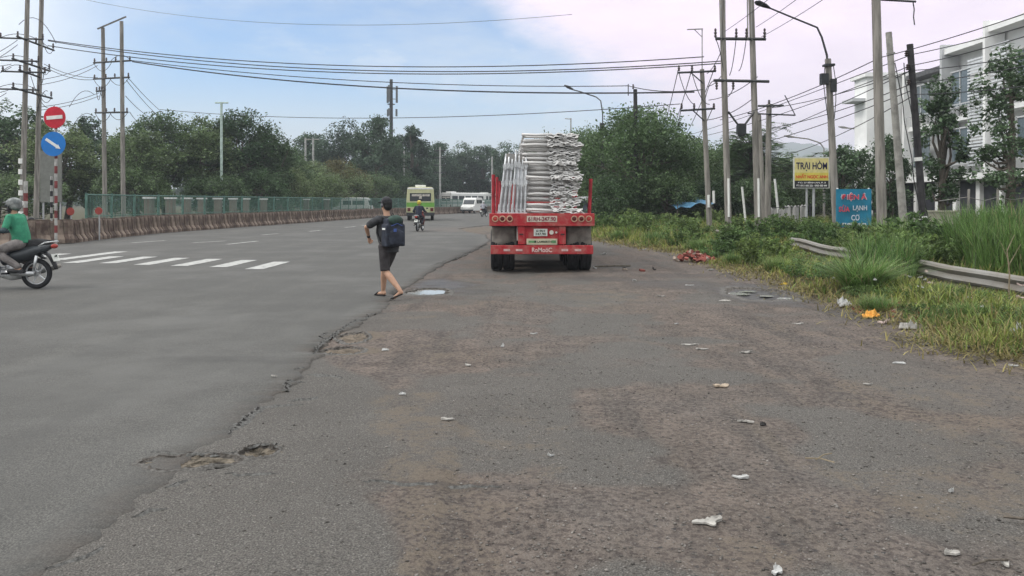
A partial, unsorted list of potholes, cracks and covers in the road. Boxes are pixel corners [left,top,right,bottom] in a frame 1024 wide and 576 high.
pothole [403,288,455,296]
pothole [234,442,283,460]
pothole [719,286,806,302]
crack [150,312,386,477]
crack [431,244,488,266]
pothole [129,451,253,473]
pothole [333,331,373,345]
pothole [315,346,368,355]
